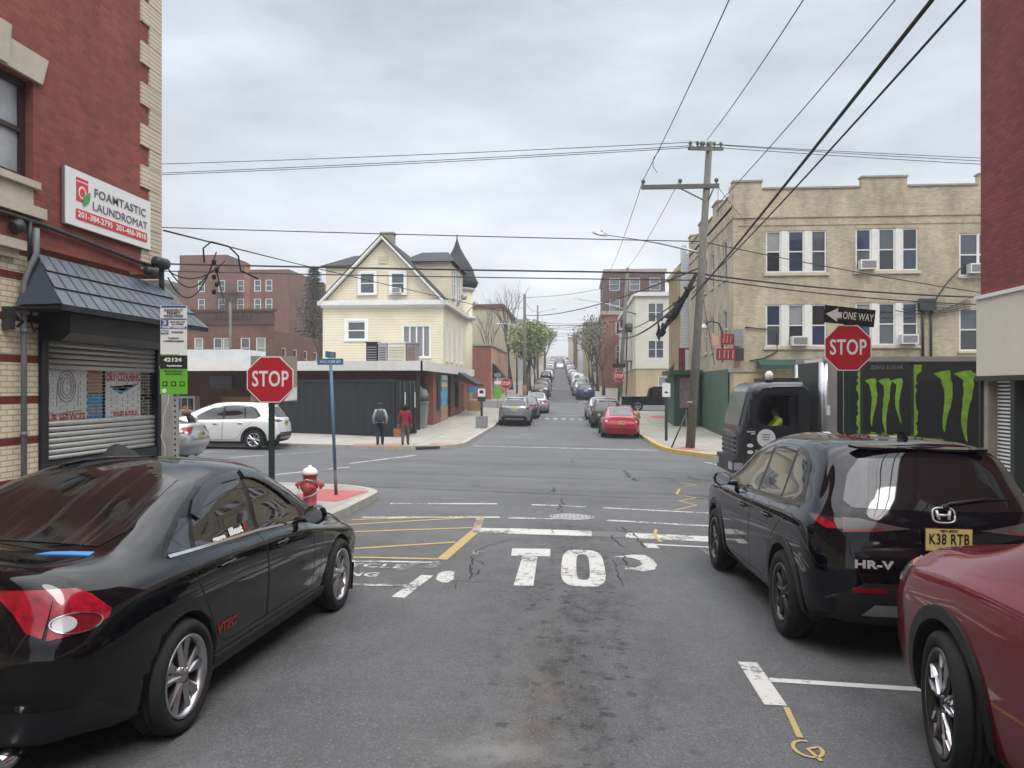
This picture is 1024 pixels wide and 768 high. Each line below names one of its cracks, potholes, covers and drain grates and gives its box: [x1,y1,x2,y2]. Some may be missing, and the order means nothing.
crack [452,539,509,588]
crack [611,526,645,588]
